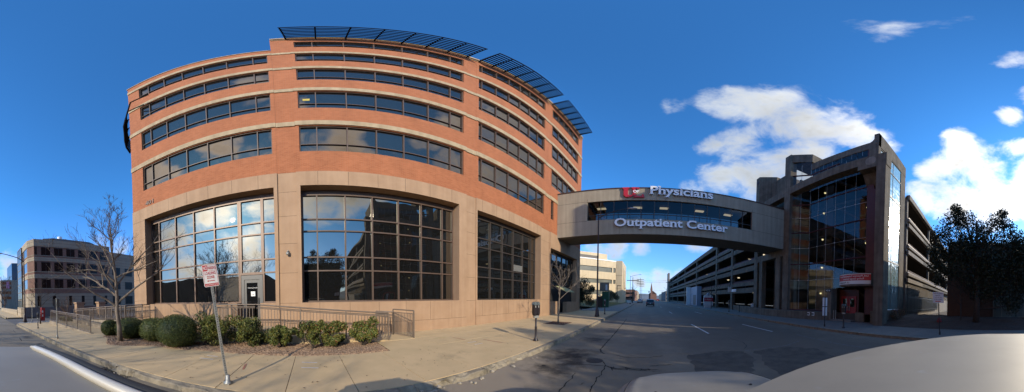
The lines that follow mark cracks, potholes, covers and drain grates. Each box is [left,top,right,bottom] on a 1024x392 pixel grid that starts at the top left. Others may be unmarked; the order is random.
crack [559,321,671,392]
